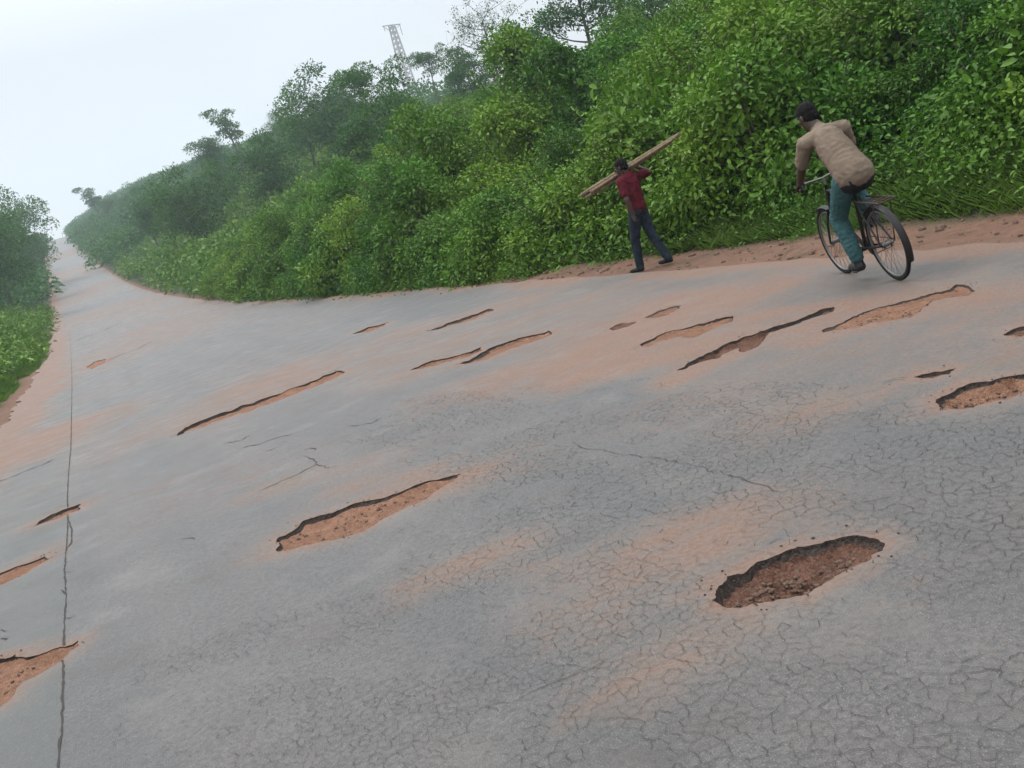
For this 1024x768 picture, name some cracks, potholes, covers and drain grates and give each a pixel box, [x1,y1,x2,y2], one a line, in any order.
crack [177,371,381,490]
pothole [0,641,84,707]
pothole [640,316,734,347]
pothole [269,471,470,552]
crack [565,407,1024,591]
crack [351,378,916,506]
crack [513,542,1024,768]
pothole [889,365,961,385]
pothole [821,282,977,332]
pothole [929,374,1024,410]
pothole [701,524,899,610]
